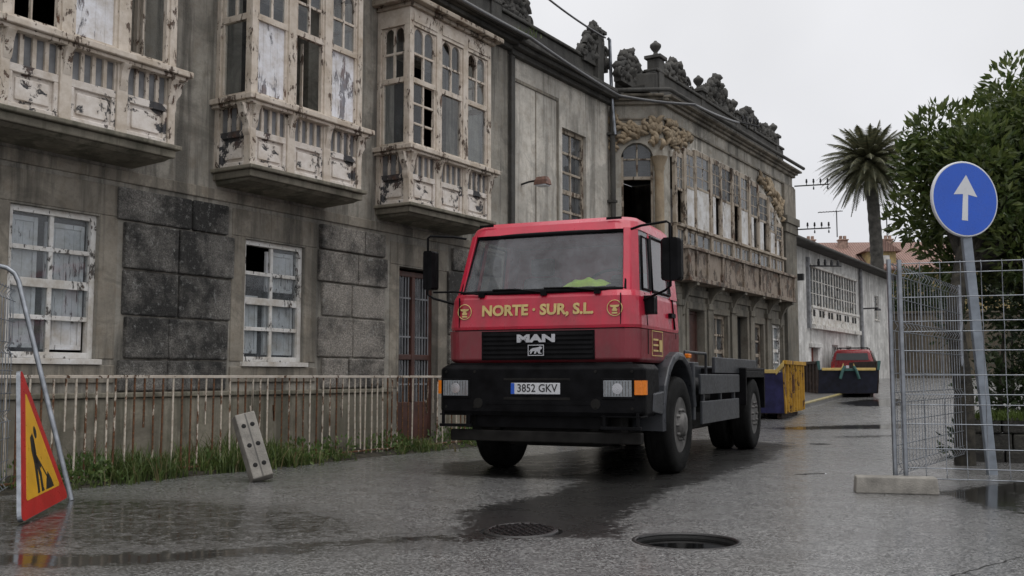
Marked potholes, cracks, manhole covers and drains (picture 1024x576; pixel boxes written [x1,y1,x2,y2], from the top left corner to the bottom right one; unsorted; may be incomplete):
manhole cover [632,532,741,550]
